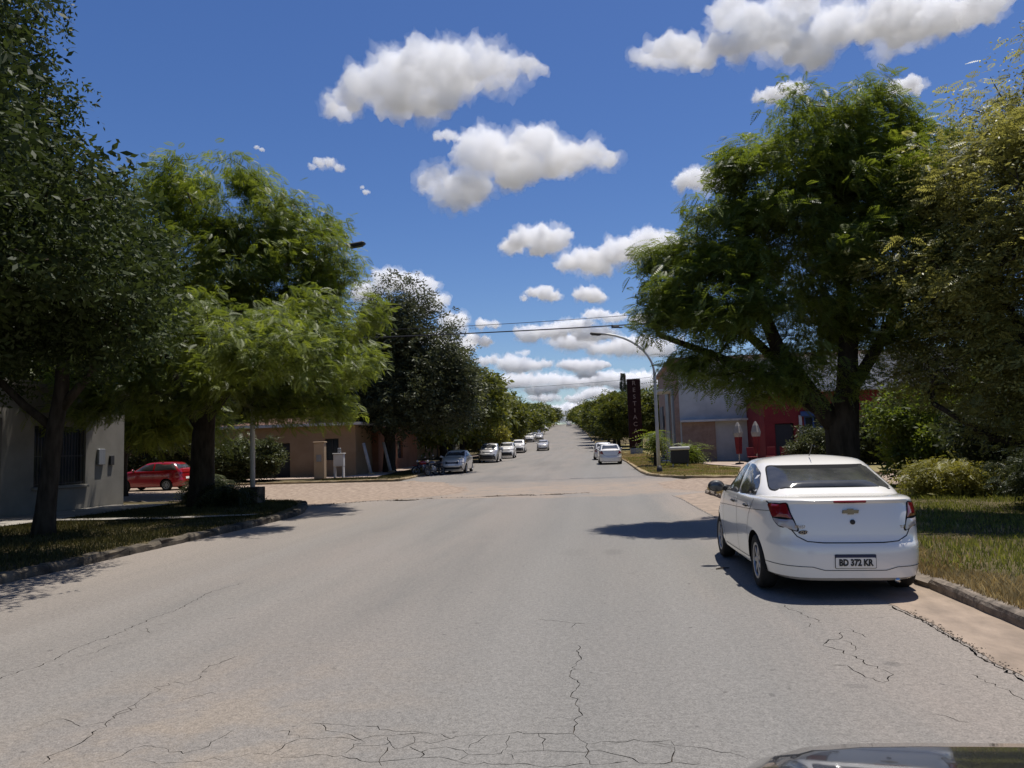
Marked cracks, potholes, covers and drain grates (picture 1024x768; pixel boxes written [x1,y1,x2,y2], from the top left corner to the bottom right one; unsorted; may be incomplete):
crack [784,606,892,682]
crack [889,605,1024,699]
crack [44,657,234,763]
crack [0,585,234,679]
crack [257,645,748,767]
